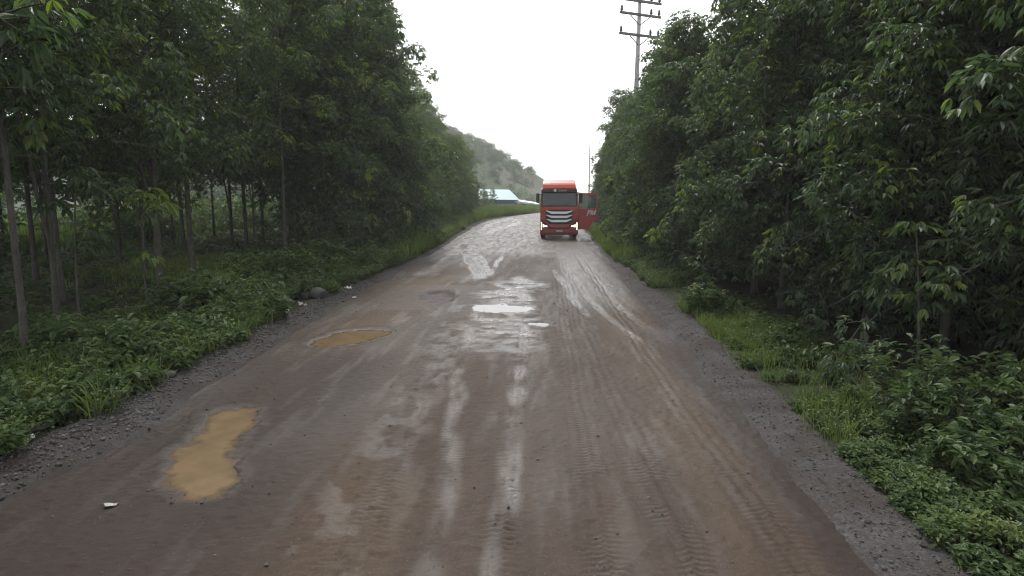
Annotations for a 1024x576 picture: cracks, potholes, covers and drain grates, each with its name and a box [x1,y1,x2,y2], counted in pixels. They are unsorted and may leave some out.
pothole [296,326,400,349]
pothole [411,288,466,305]
pothole [463,303,543,314]
pothole [141,402,274,509]
